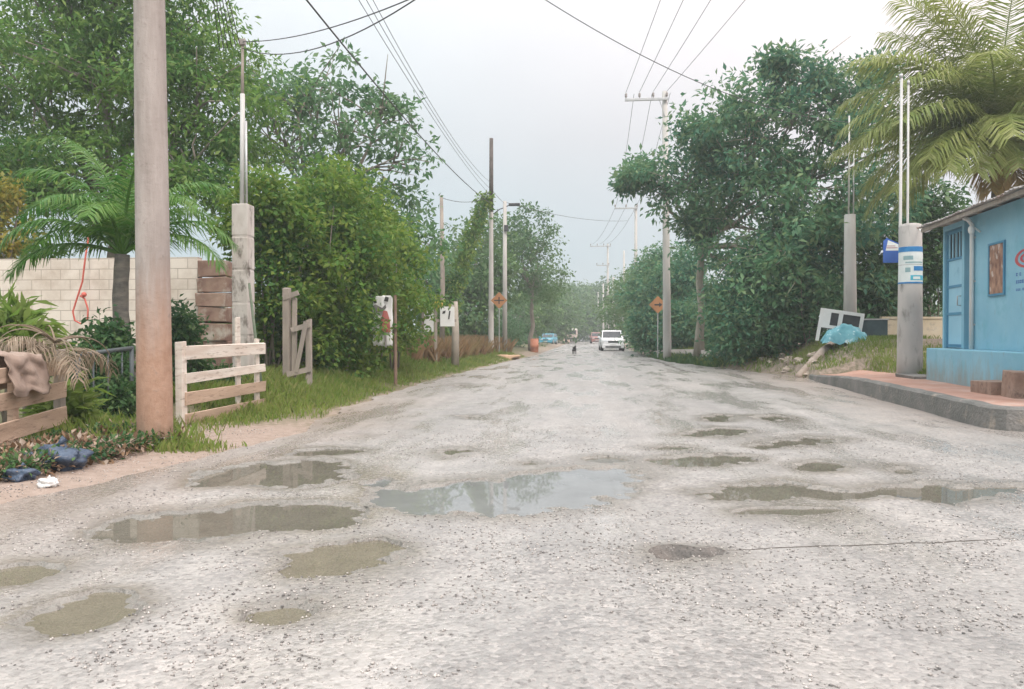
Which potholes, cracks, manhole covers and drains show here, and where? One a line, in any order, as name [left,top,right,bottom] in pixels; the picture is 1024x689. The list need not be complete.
pothole [184,456,363,490]
pothole [743,436,848,450]
crack [723,538,1014,551]
pothole [238,599,319,626]
pothole [82,499,372,543]
pothole [353,464,652,518]
pothole [648,544,725,561]
pothole [790,459,857,472]
pothole [0,561,67,587]
pothole [642,452,766,467]
pothole [669,426,756,437]
pothole [3,588,148,638]
